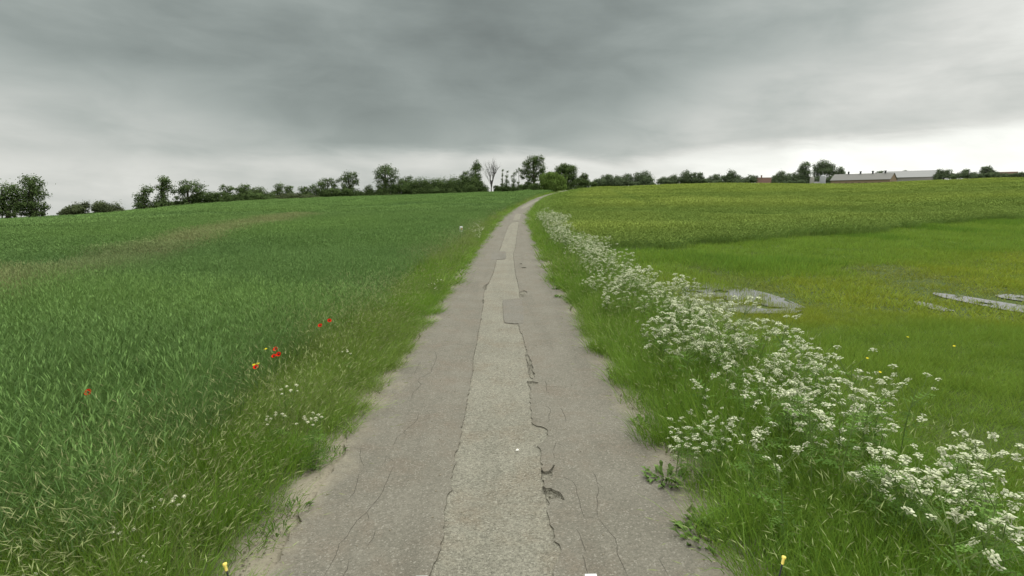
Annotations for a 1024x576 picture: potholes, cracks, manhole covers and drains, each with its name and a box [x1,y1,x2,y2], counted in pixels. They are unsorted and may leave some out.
crack [325,413,419,576]
crack [564,471,626,574]
pothole [543,486,564,501]
